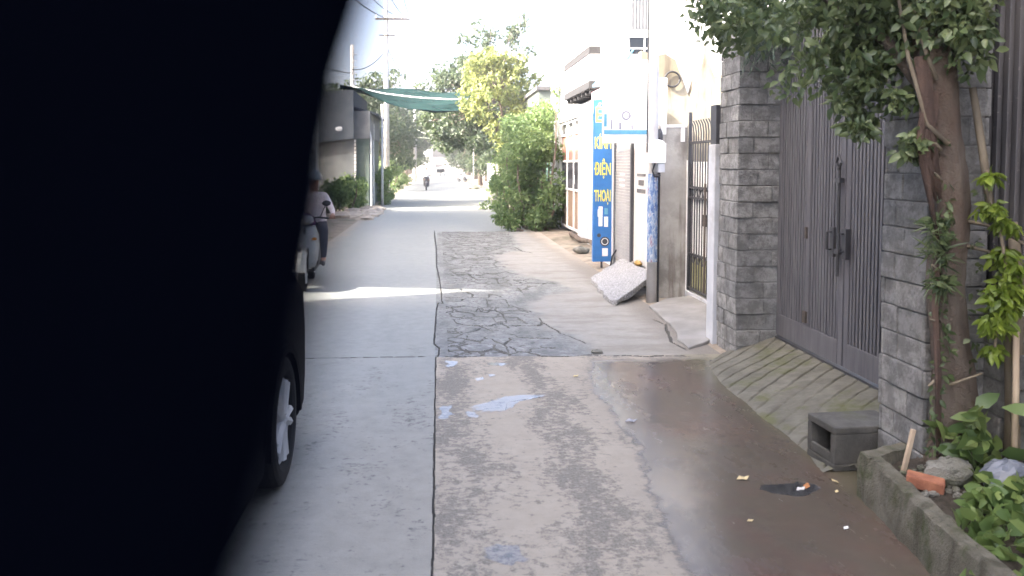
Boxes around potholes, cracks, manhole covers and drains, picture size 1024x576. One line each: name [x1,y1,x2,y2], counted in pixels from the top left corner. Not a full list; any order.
crack [431,231,689,576]
